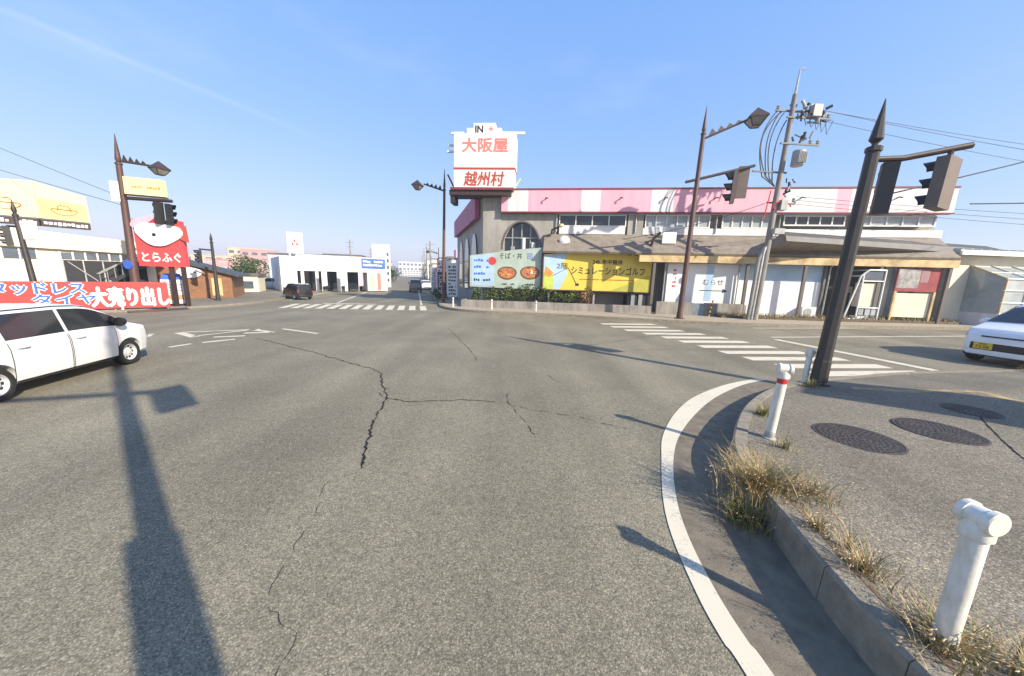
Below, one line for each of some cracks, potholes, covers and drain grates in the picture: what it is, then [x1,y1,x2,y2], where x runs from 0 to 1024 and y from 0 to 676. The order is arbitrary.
manhole cover [940,403,1006,419]
crack [980,417,1024,459]
manhole cover [812,423,909,455]
crack [257,338,627,676]
manhole cover [892,417,992,446]
